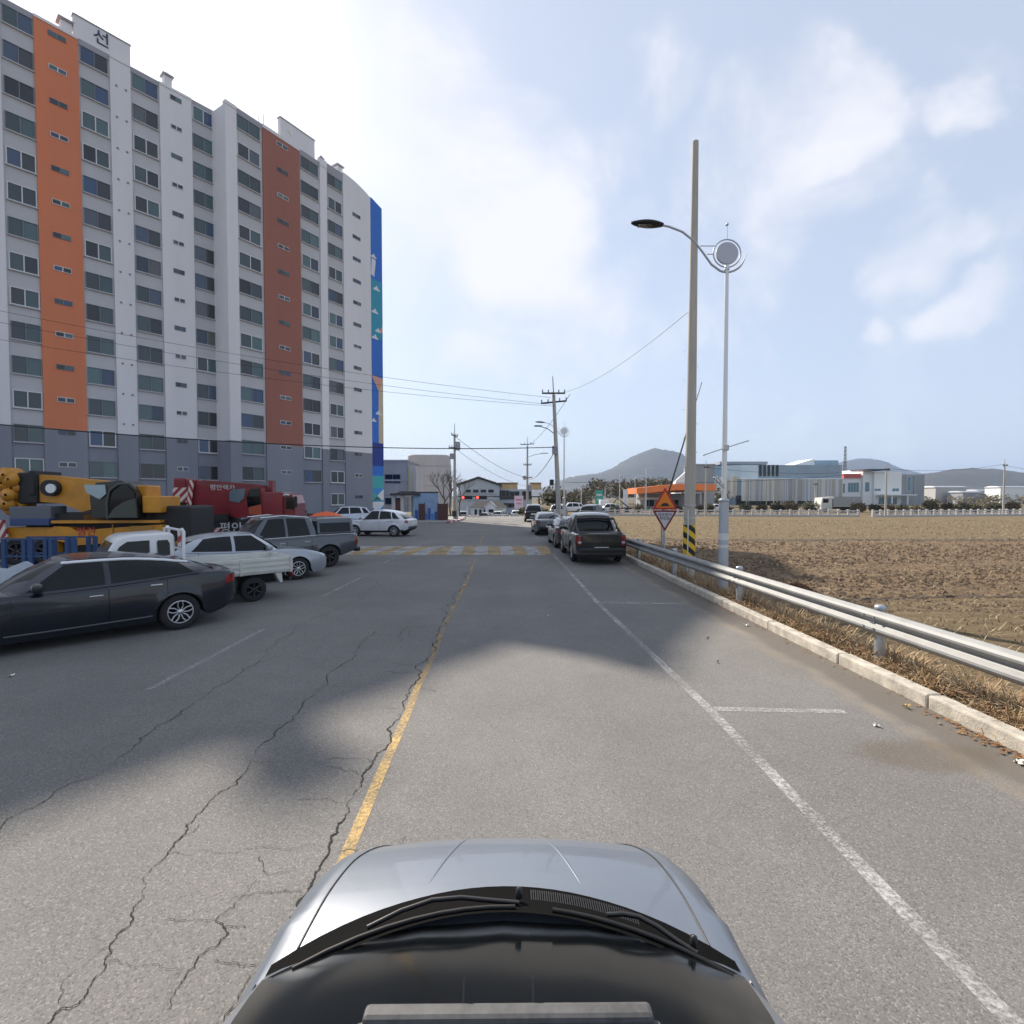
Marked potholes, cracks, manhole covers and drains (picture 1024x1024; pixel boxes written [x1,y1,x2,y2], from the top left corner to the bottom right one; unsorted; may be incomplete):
crack [47,577,503,1024]
